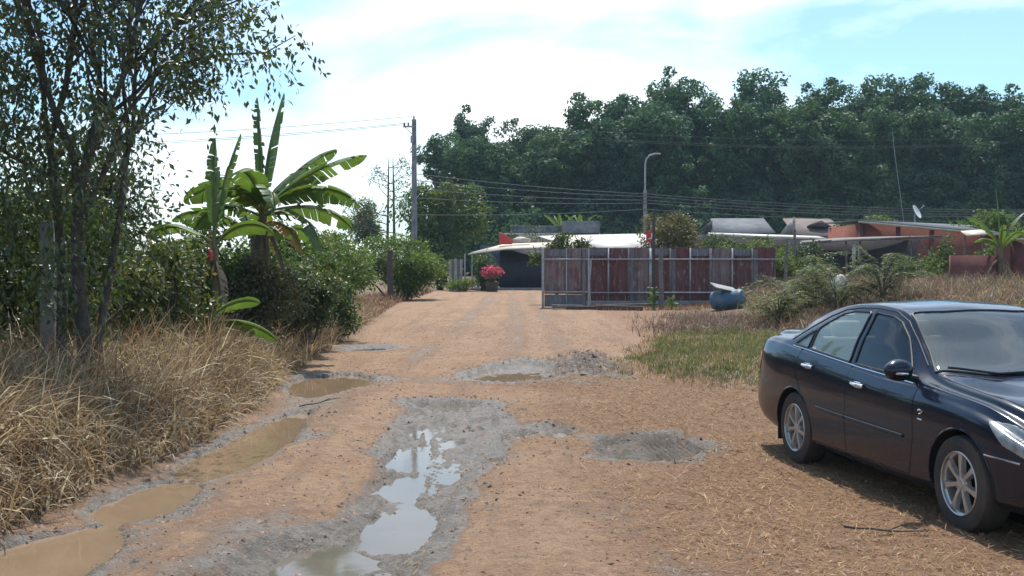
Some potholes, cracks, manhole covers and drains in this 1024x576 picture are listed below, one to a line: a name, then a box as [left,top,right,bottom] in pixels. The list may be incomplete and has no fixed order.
pothole [164,397,549,576]
pothole [334,343,404,352]
pothole [67,480,219,532]
pothole [577,428,724,464]
pothole [279,371,381,400]
pothole [0,524,150,576]
pothole [454,357,569,383]
